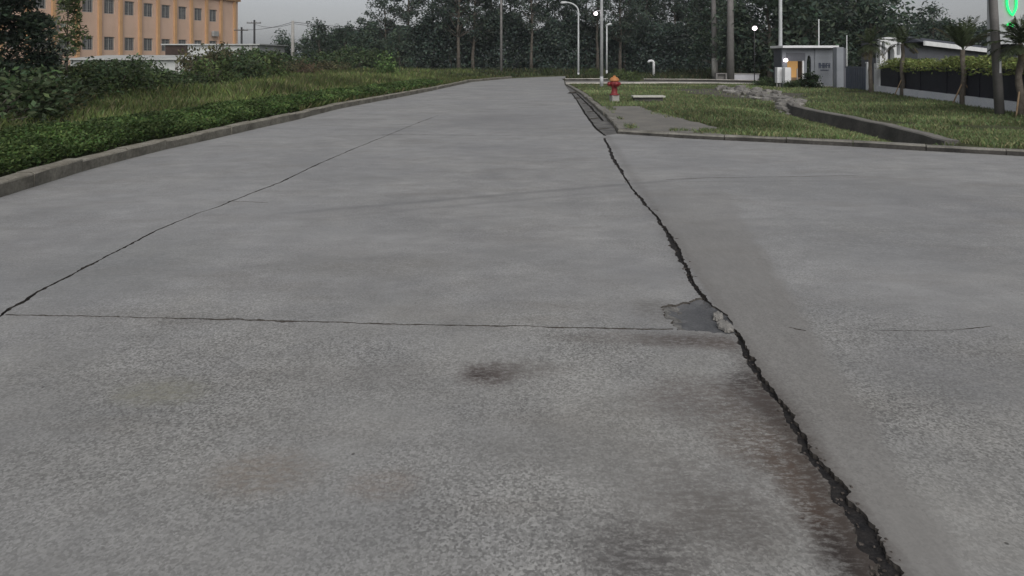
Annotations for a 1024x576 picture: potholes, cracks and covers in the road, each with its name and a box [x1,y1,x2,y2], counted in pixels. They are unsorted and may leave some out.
pothole [661,298,737,335]
crack [603,138,989,576]
